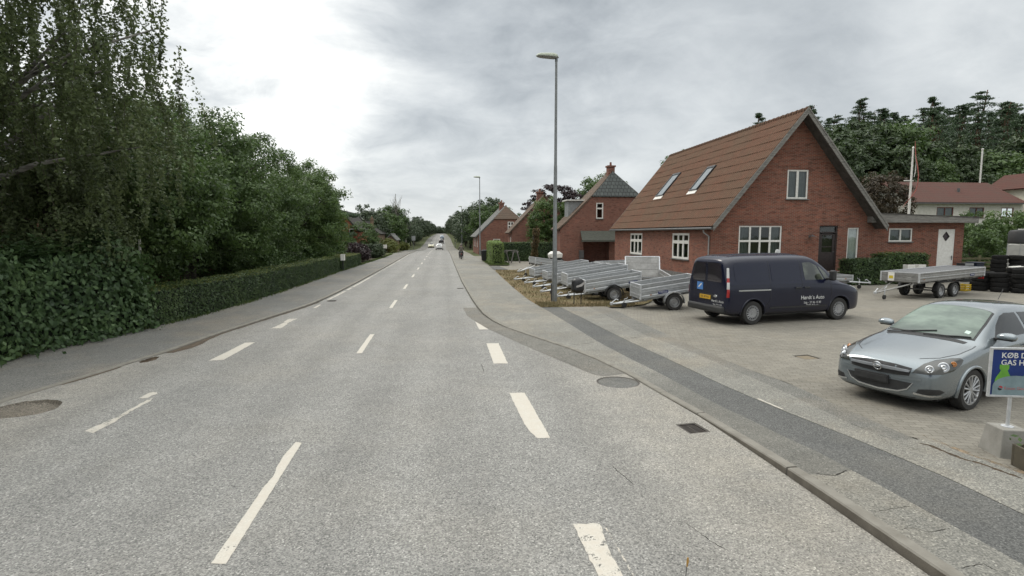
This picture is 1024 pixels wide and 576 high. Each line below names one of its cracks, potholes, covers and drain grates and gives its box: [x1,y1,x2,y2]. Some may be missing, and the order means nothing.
crack [920,443,1023,479]
drain grate [677,423,710,434]
manhole cover [597,377,640,388]
